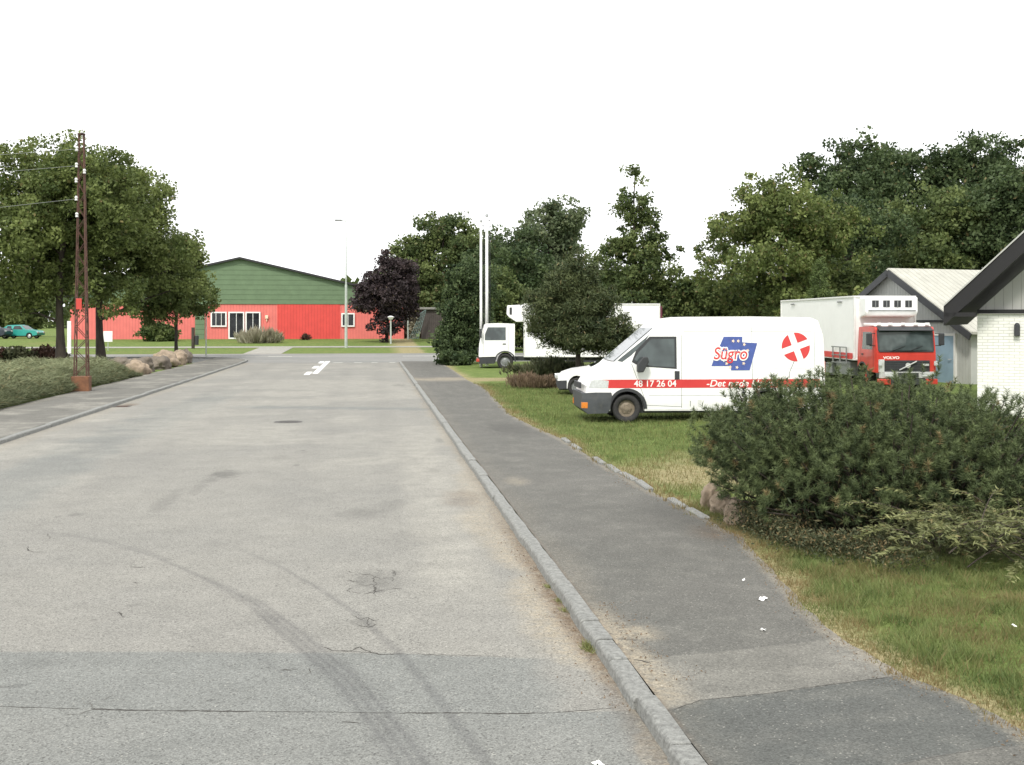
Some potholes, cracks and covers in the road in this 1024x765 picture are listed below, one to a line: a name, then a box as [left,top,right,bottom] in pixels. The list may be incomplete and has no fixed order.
crack [347,569,397,596]
crack [325,647,477,656]
